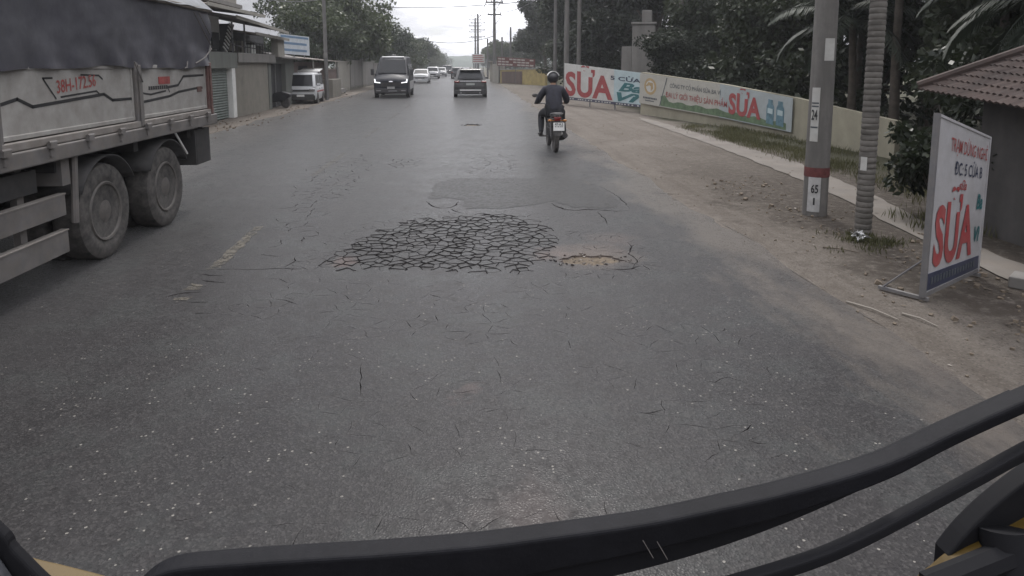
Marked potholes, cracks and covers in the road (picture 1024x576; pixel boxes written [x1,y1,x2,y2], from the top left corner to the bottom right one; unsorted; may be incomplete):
pothole [549,252,632,266]
crack [167,154,661,348]
